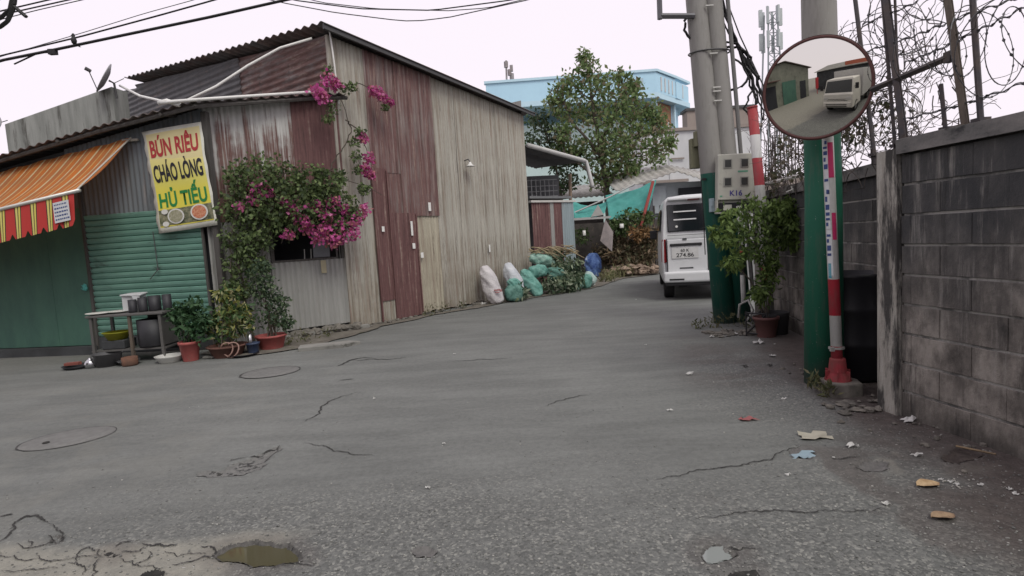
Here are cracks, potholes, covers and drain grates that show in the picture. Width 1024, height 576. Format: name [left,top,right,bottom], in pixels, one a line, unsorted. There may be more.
crack [0,513,217,575]
crack [662,446,800,479]
crack [305,357,403,421]
crack [696,508,878,519]
manhole cover [239,366,300,378]
manhole cover [15,426,117,451]
pothole [212,539,304,568]
